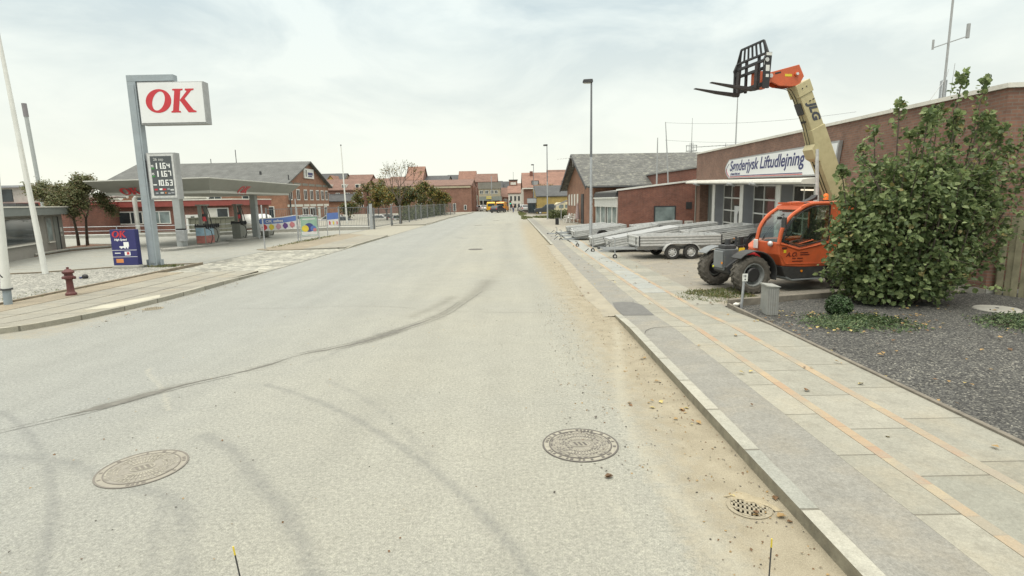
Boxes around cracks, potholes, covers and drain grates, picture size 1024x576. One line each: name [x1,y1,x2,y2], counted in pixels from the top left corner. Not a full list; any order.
manhole cover [92,449,189,489]
manhole cover [542,428,619,462]
drain grate [723,491,783,519]
